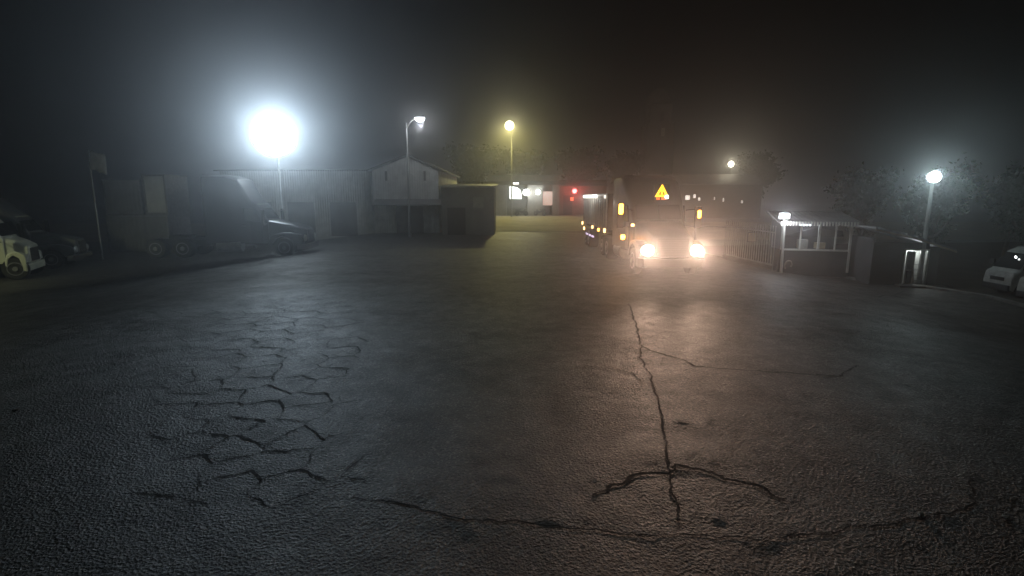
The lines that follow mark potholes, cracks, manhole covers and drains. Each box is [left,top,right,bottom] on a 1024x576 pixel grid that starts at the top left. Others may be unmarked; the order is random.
crack [132,305,369,509]
crack [592,303,859,529]
